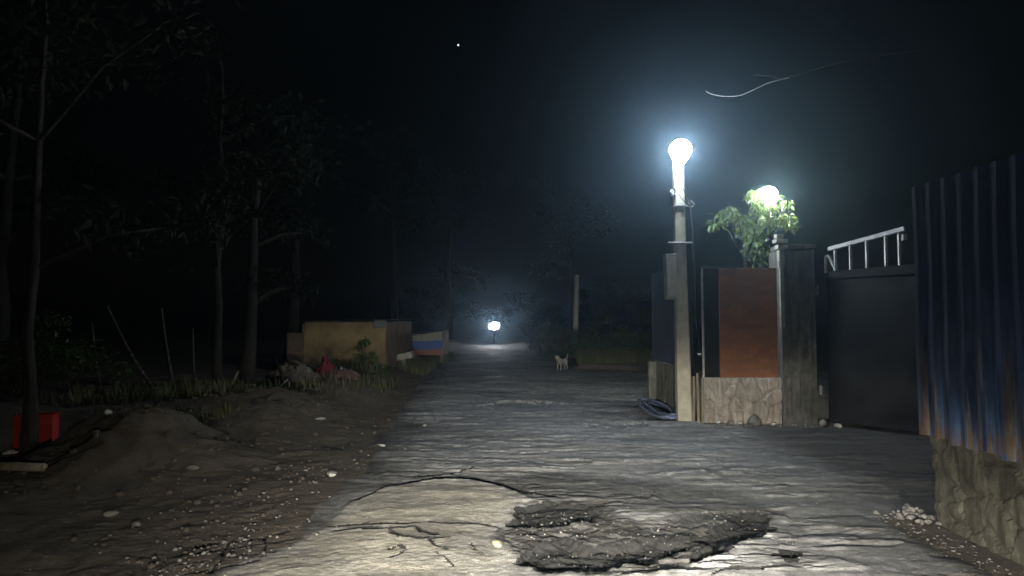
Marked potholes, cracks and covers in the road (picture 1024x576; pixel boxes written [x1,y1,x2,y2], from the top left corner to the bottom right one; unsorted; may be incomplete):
crack [355,466,557,501]
pothole [512,535,695,574]
pothole [496,500,605,531]
crack [327,521,502,567]
